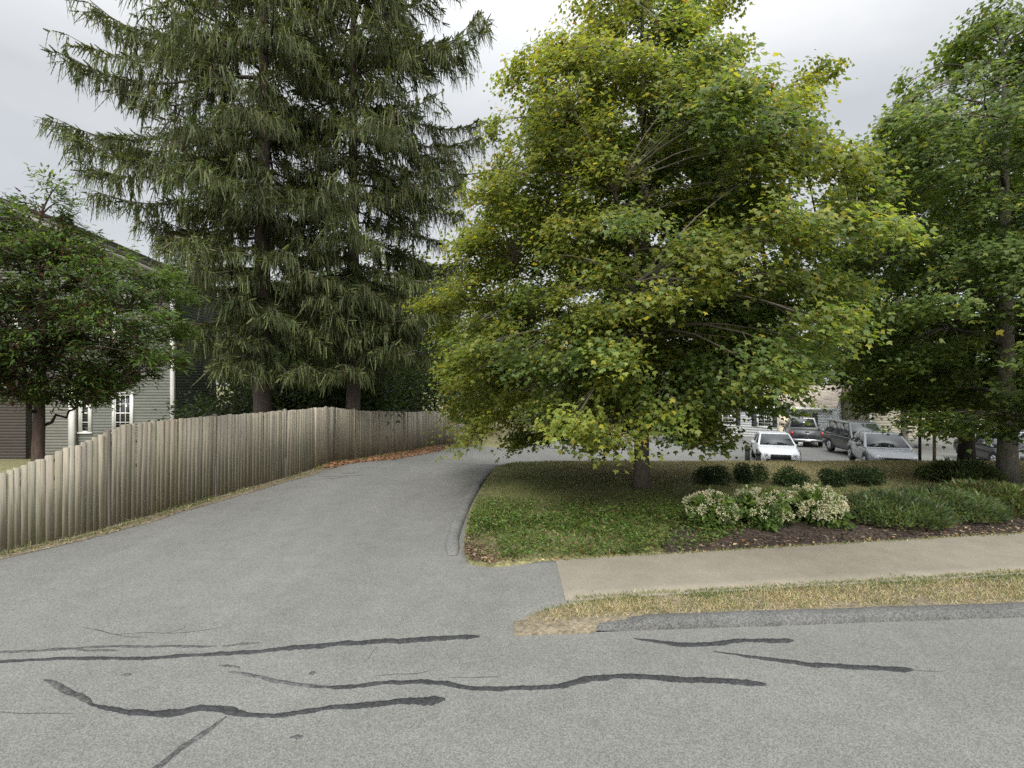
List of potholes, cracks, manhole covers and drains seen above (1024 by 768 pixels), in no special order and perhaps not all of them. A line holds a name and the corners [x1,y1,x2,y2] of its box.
crack [0,627,216,653]
